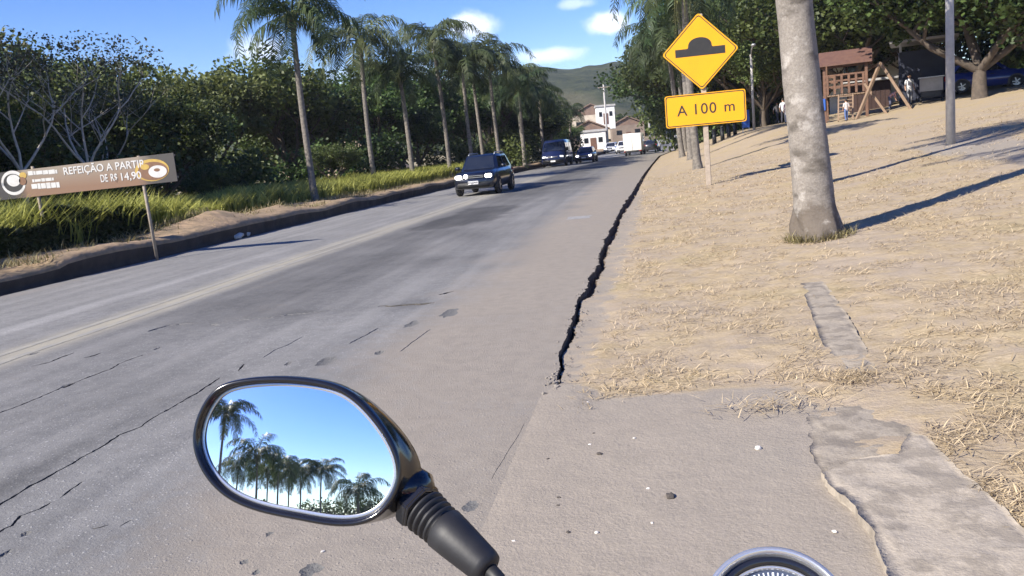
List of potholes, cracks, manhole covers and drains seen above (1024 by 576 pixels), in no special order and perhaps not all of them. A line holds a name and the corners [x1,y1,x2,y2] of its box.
crack [0,353,142,413]
crack [0,378,219,532]
crack [556,150,675,384]
